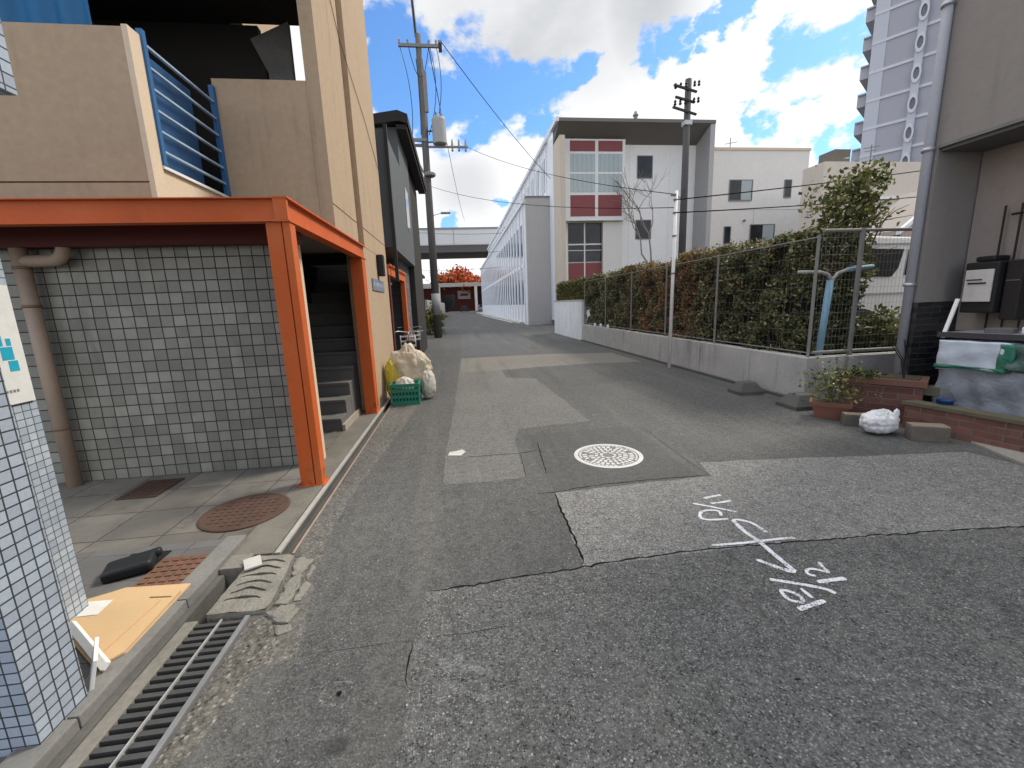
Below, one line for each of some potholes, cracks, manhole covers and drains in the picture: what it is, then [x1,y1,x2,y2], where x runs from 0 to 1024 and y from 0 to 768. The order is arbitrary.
manhole cover [197,493,290,533]
crack [313,641,413,687]
drain grate [79,615,250,768]
manhole cover [574,444,643,468]
crack [539,430,706,564]
